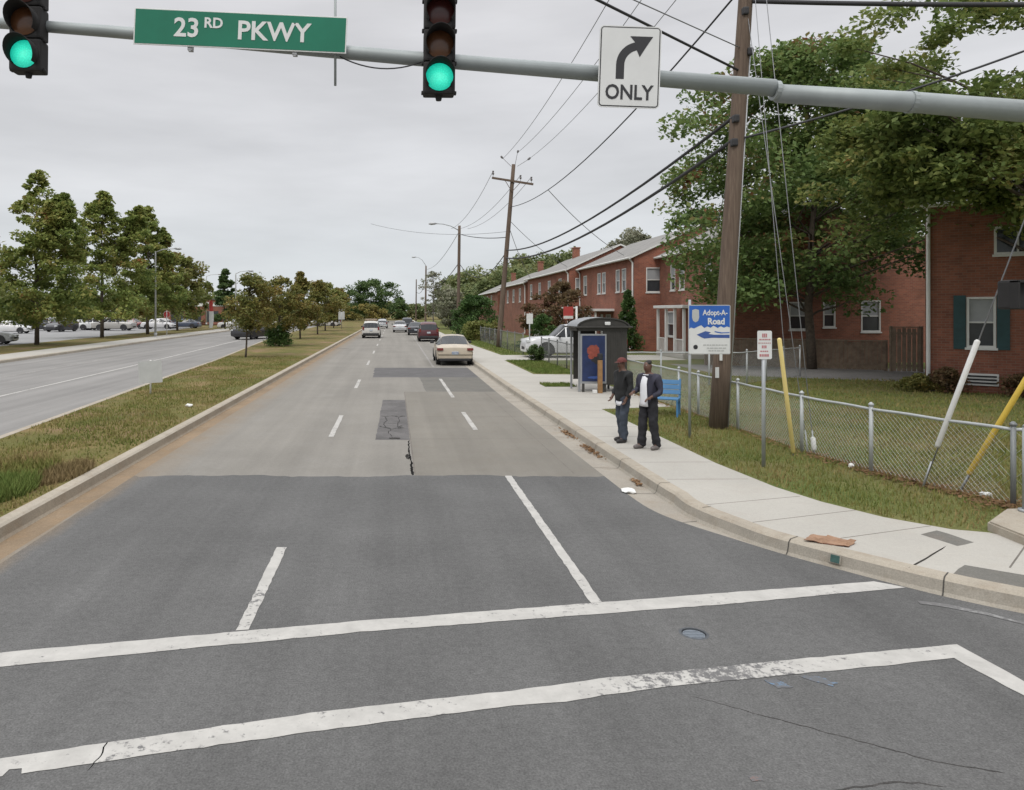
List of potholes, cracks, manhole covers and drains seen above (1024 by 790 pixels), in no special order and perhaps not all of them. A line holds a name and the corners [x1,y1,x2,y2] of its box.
manhole cover [679,627,709,640]
crack [692,696,1003,790]
crack [380,416,414,475]
